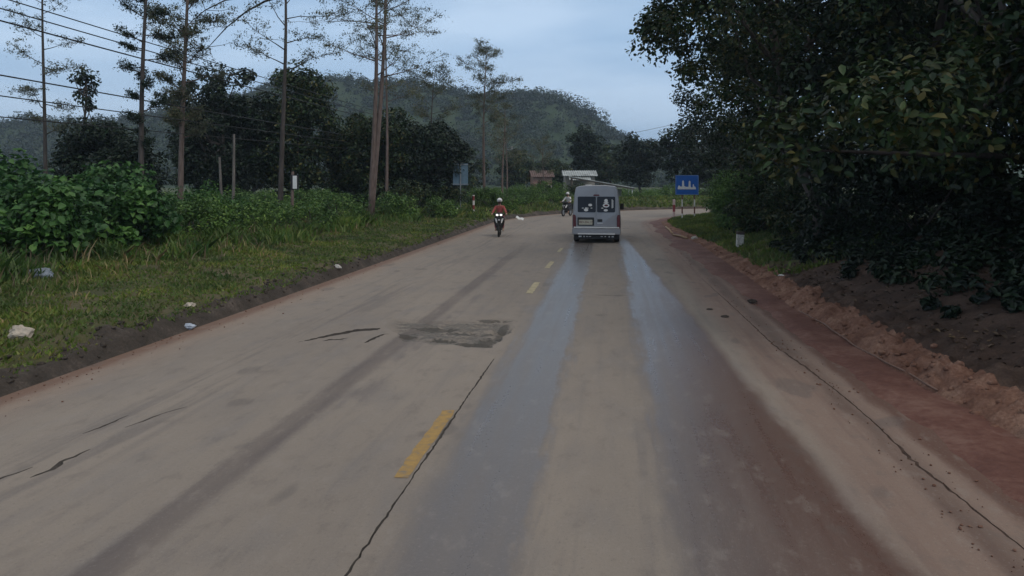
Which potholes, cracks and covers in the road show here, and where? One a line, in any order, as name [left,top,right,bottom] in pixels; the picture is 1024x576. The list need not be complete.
crack [300,328,384,343]
pothole [385,319,517,348]
crack [0,407,185,479]
crack [344,359,494,576]
